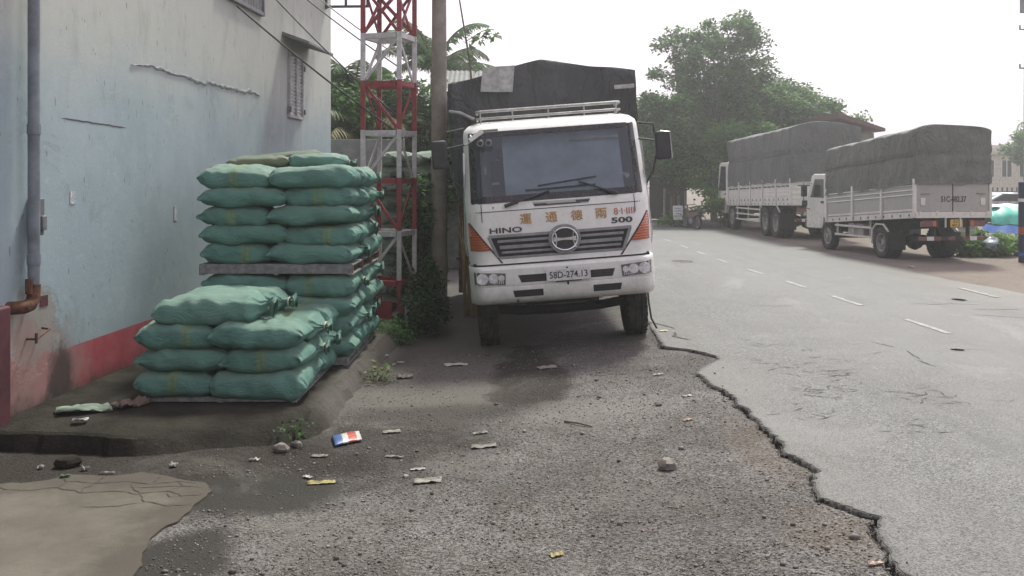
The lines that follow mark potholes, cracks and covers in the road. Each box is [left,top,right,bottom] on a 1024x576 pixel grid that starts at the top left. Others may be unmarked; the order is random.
crack [0,476,199,507]
crack [738,337,1015,433]
crack [650,322,911,576]
